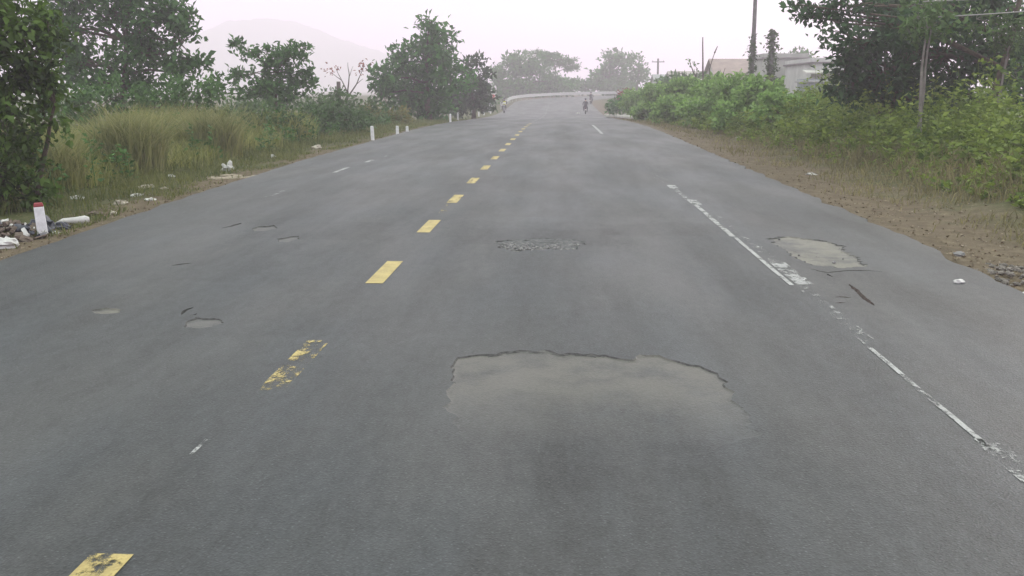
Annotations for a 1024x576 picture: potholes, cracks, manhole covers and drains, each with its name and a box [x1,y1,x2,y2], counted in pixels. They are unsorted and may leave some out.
crack [813,269,882,305]
pothole [495,238,587,252]
pothole [184,317,224,328]
